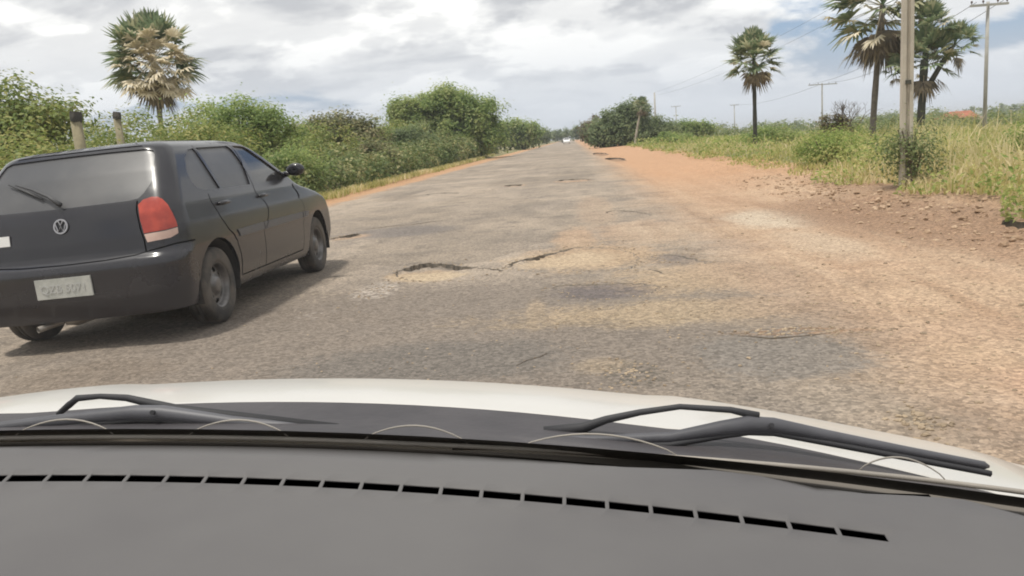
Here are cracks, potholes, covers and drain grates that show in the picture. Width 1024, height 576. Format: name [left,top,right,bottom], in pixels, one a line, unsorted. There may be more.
pothole [393,263,503,282]
